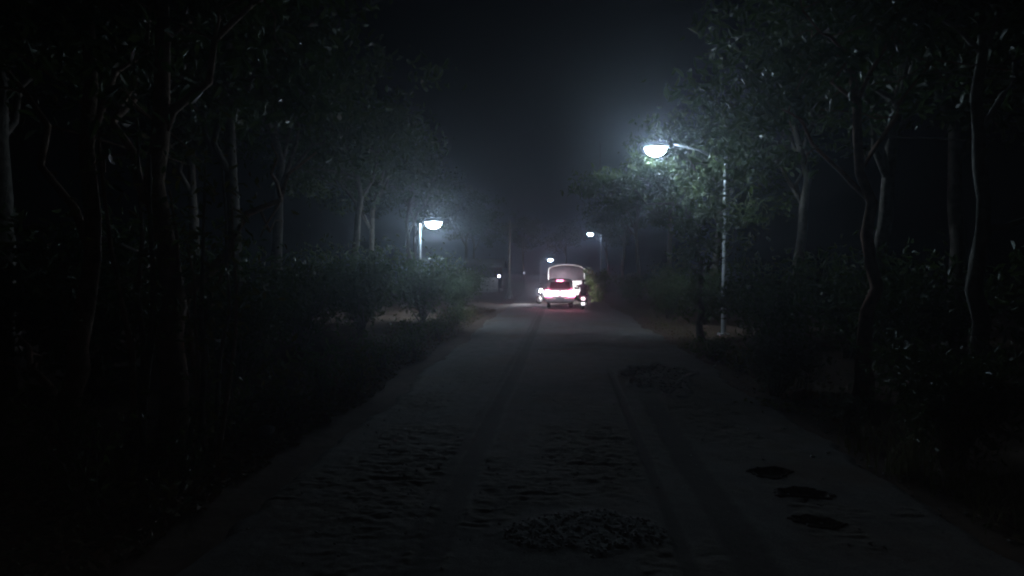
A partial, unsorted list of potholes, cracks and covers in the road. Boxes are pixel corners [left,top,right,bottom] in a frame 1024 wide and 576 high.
pothole [786,513,849,530]
pothole [745,465,794,479]
pothole [773,485,836,500]
pothole [612,361,699,400]
